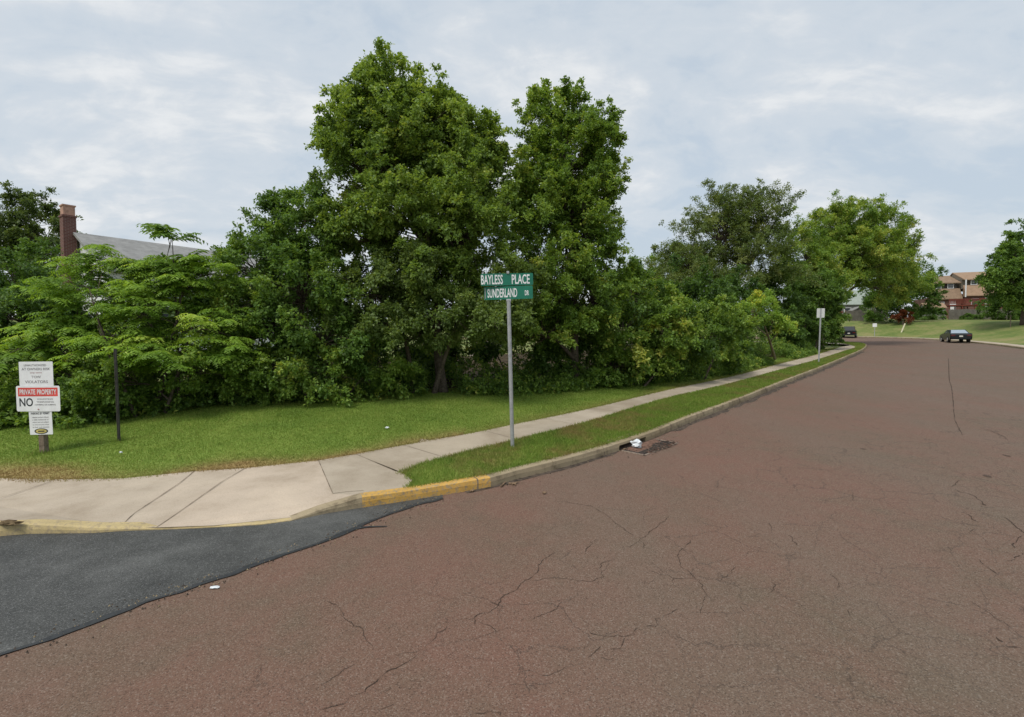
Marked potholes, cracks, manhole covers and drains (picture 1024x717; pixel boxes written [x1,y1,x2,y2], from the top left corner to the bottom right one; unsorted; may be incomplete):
crack [653,541,711,612]
crack [589,610,675,660]
drain grate [622,439,678,457]
crack [318,540,609,711]
